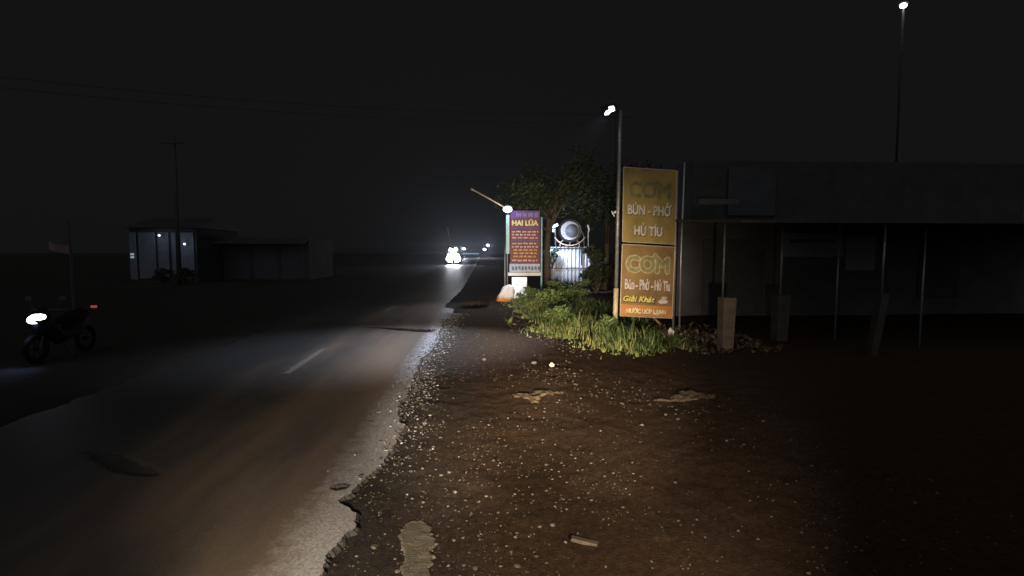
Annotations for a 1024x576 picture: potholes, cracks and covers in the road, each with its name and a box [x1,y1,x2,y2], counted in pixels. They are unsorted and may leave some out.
pothole [452,301,494,309]
pothole [78,449,169,478]
